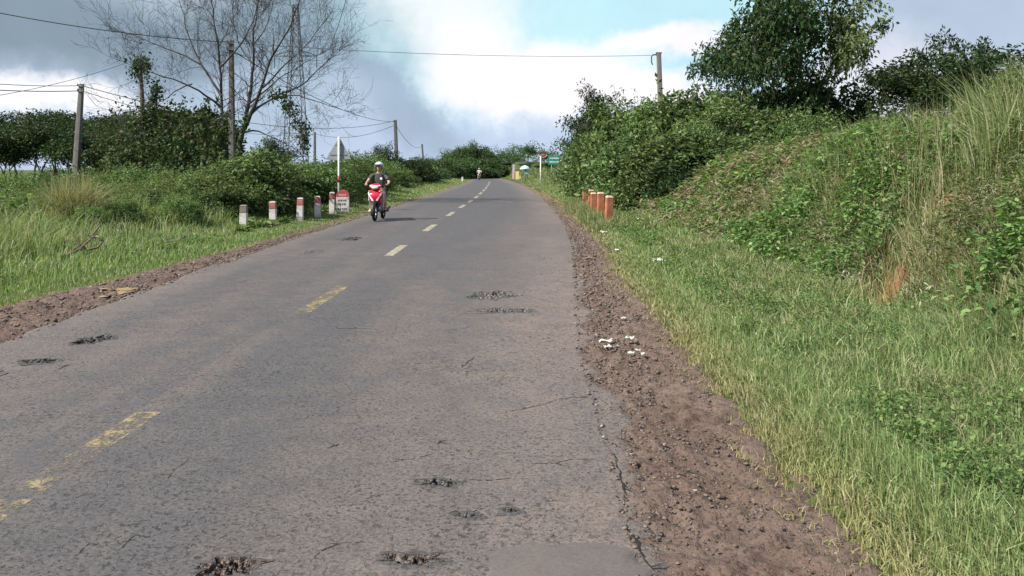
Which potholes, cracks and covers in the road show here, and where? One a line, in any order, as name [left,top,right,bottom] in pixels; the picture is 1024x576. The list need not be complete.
pothole [67,333,119,346]
pothole [188,554,276,576]
crack [613,453,633,503]
pothole [410,477,468,490]
pothole [371,551,453,570]
pothole [497,506,526,516]
pothole [447,511,488,522]
pothole [463,290,523,301]
